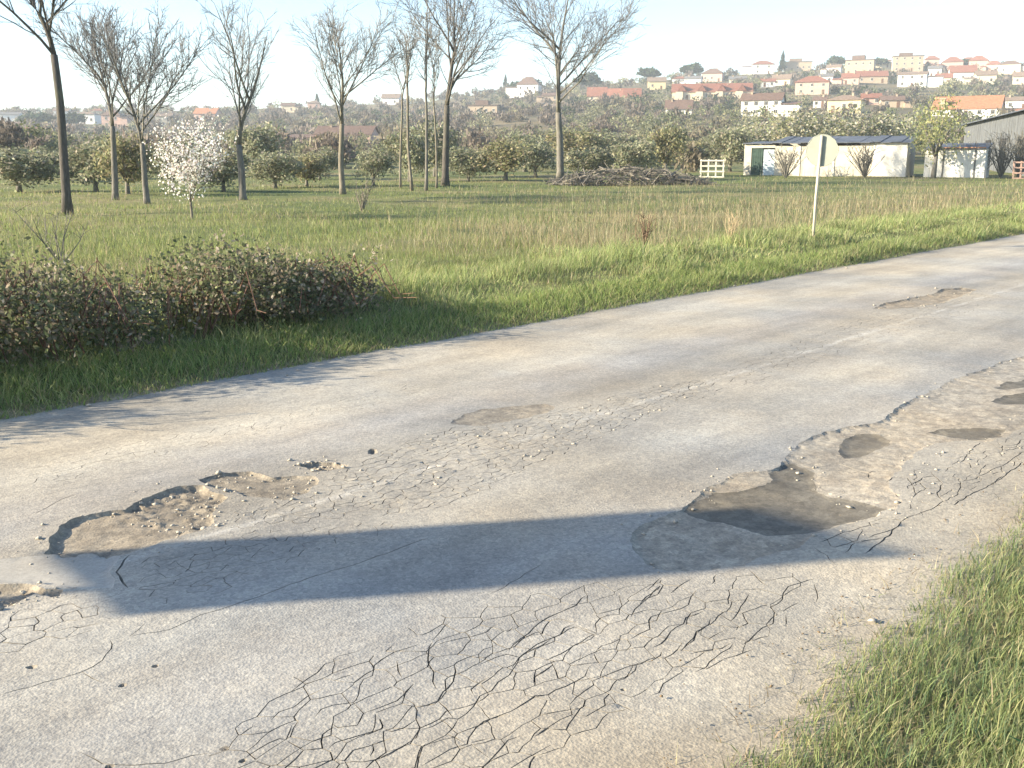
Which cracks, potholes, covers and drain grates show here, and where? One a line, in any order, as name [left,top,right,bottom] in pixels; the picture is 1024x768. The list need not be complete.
crack [209,570,818,768]
pothole [44,485,227,559]
pothole [630,461,888,572]
pothole [451,404,555,426]
pothole [874,288,977,309]
pothole [199,471,319,500]
crack [0,603,113,695]
pothole [0,584,63,607]
crack [116,280,1014,604]
pothole [785,356,1024,511]
